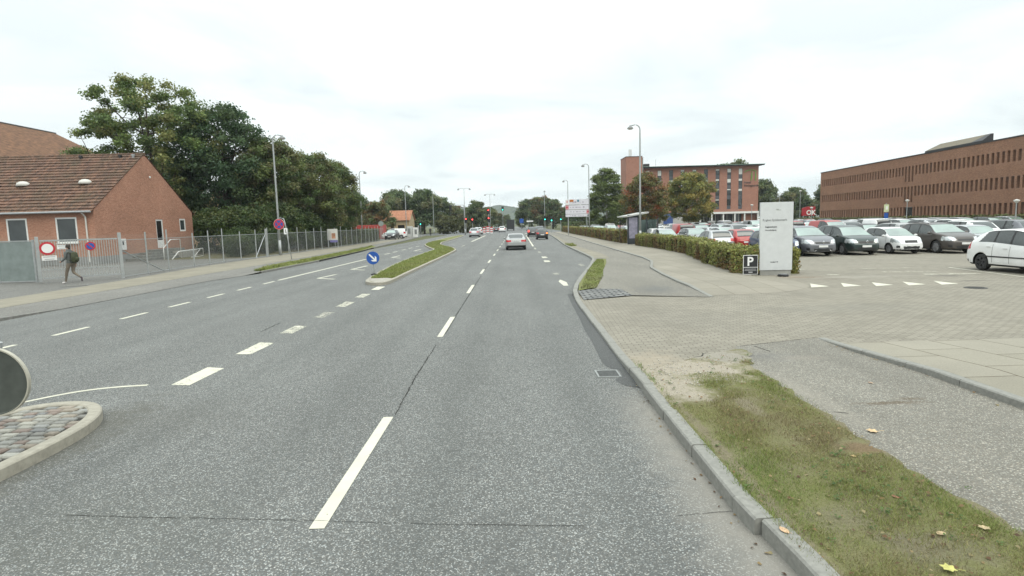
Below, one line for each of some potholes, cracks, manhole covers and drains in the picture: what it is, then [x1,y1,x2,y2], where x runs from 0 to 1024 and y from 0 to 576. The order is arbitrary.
drain grate [594,370,622,378]
